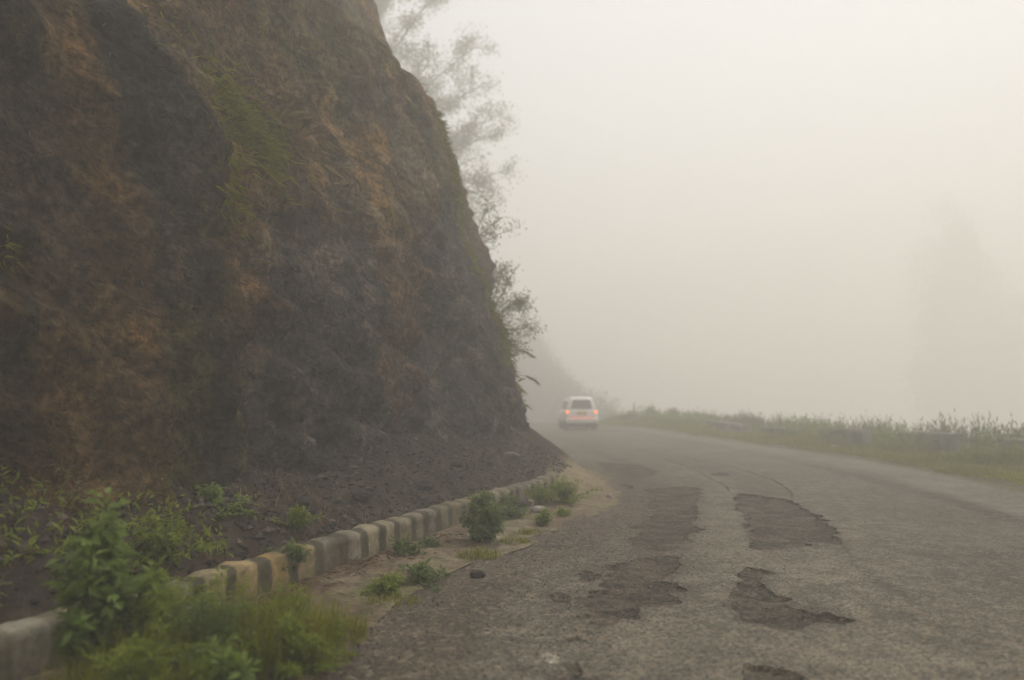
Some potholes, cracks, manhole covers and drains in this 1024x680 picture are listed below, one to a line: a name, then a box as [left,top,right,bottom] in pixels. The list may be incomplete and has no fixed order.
crack [657,454,793,497]
